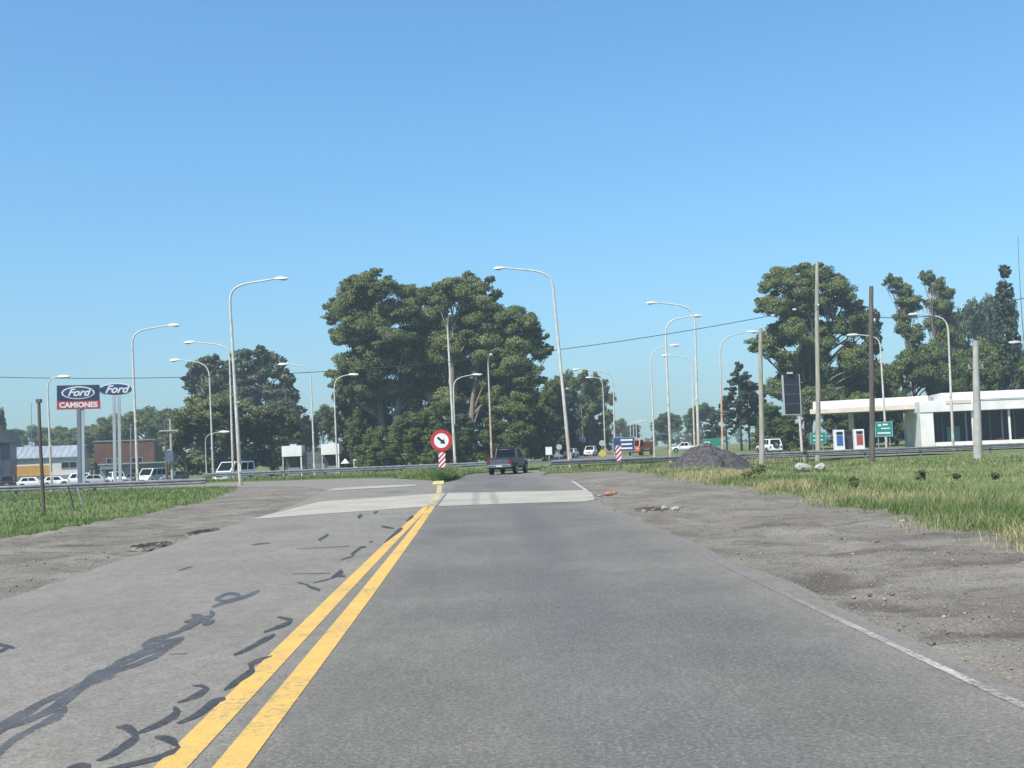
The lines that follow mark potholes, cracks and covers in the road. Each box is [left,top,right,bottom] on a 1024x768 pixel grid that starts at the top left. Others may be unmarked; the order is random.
pothole [183,528,220,538]
pothole [128,541,173,552]
